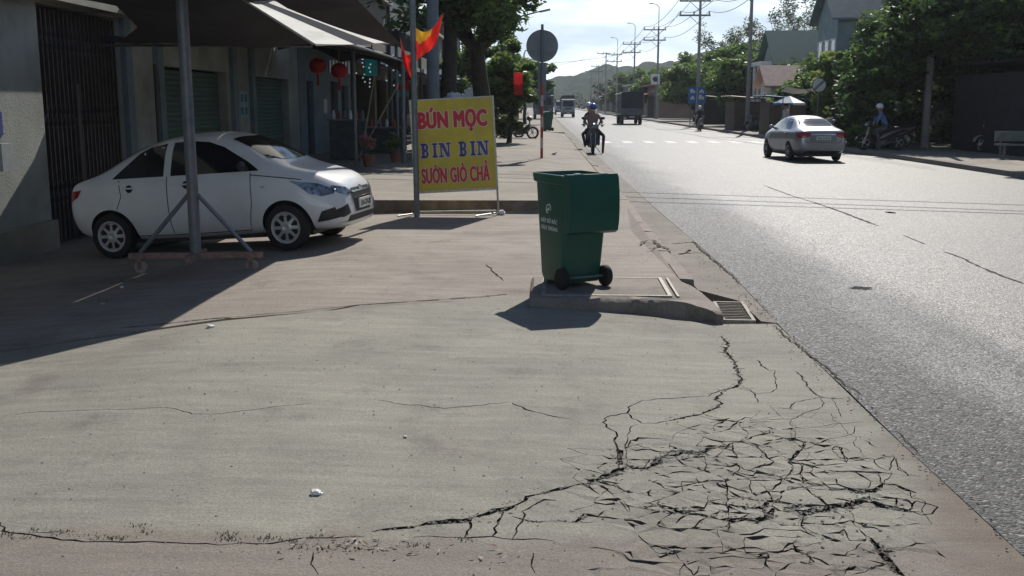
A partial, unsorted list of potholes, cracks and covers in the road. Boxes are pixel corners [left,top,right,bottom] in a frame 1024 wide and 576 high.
drain grate [713,301,756,324]
manhole cover [541,277,680,298]
crack [7,403,305,416]
crack [372,336,946,576]
